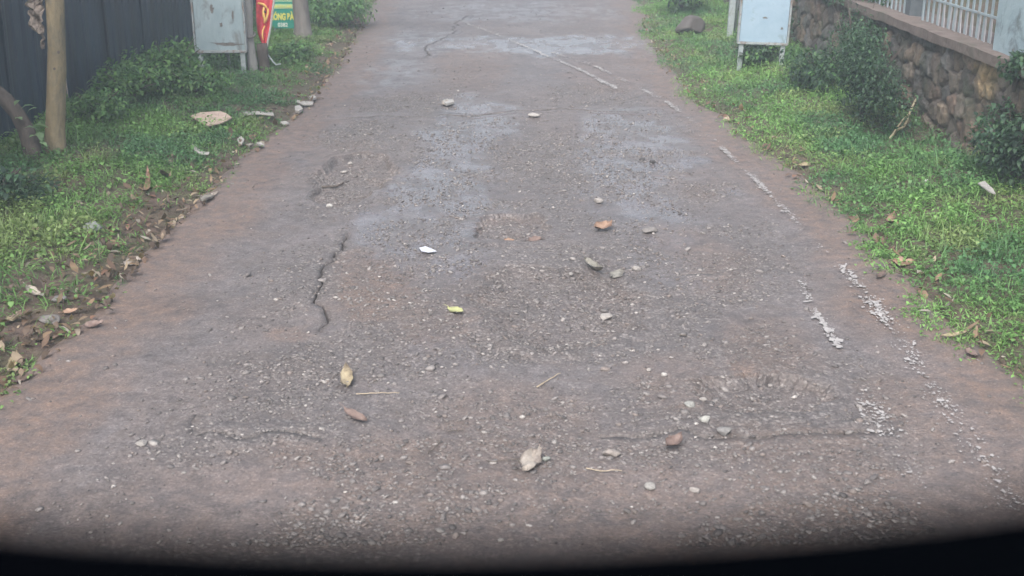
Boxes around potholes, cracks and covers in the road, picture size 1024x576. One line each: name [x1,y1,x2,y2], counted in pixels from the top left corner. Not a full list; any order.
pothole [666,362,872,426]
crack [417,15,474,58]
crack [599,418,923,450]
crack [164,414,335,450]
pothole [457,209,571,248]
crack [294,231,364,333]
